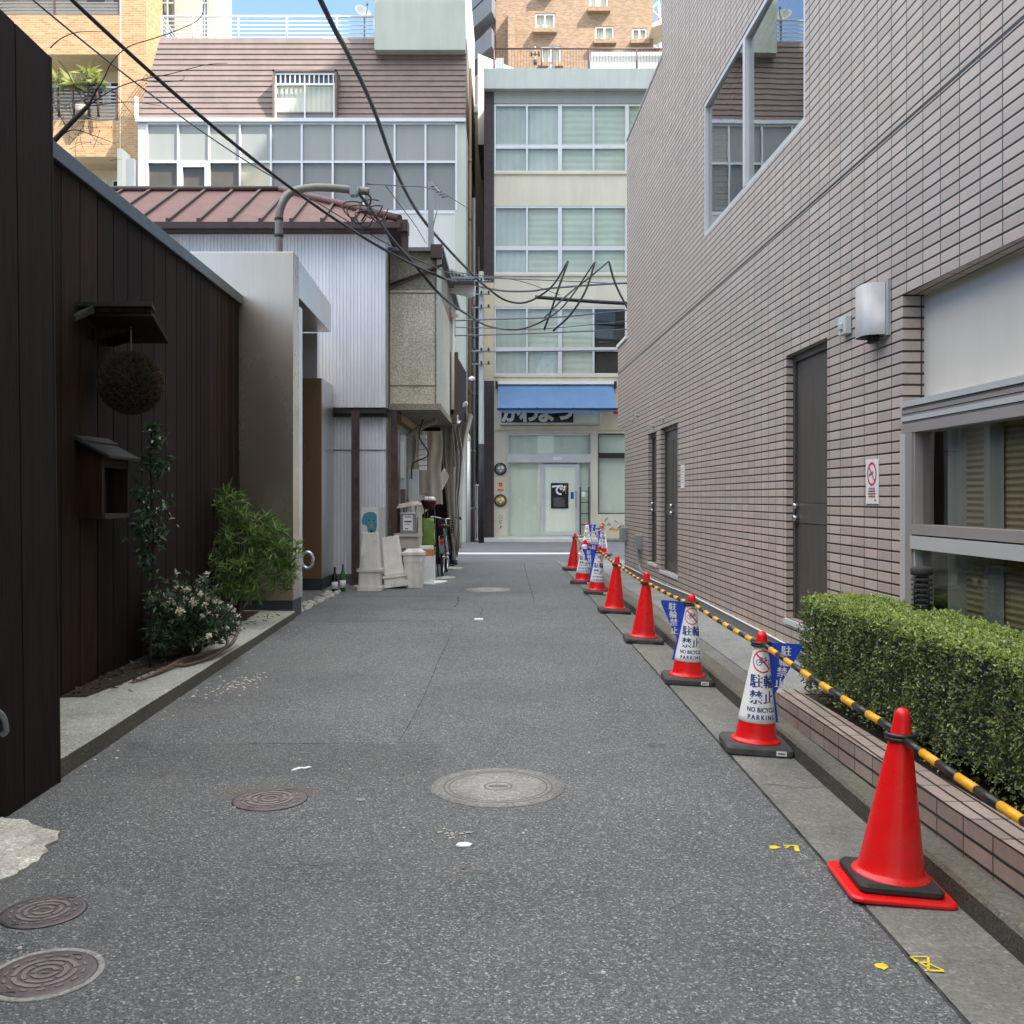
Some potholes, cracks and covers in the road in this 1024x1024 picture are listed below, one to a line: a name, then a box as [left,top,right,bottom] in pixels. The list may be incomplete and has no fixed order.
manhole cover [232,788,308,811]
manhole cover [0,895,87,930]
manhole cover [0,948,105,1003]
crack [375,596,459,743]
manhole cover [430,768,565,808]
